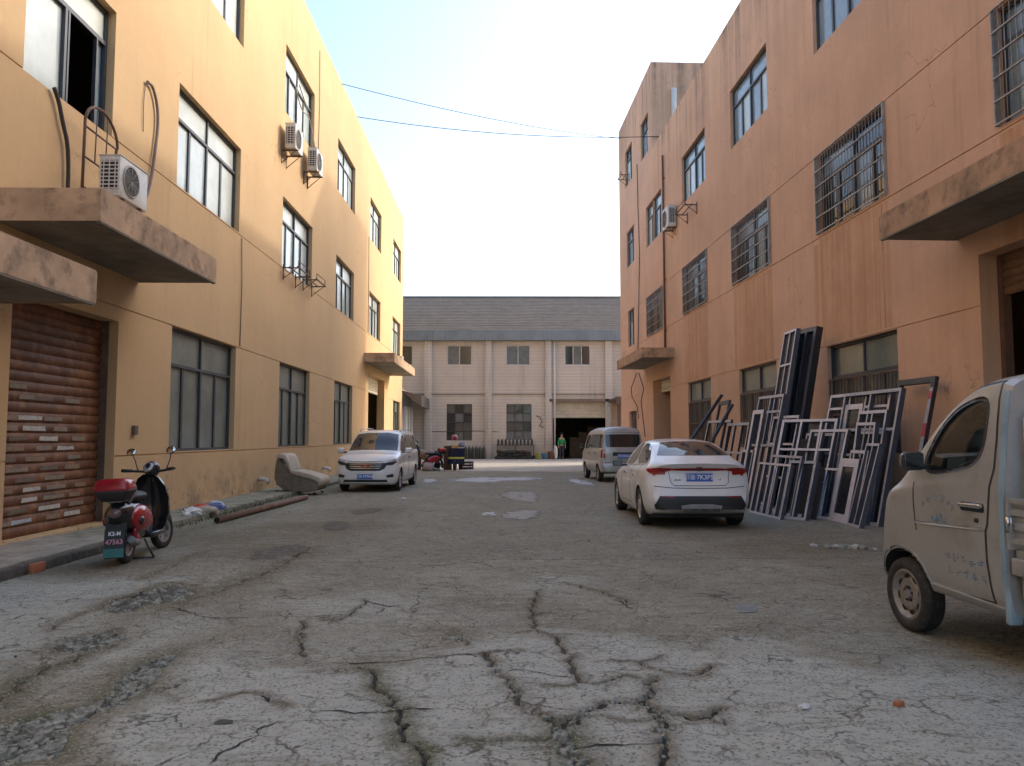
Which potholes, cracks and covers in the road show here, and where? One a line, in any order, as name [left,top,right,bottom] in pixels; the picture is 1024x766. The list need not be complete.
pothole [109,588,189,613]
crack [319,592,726,766]
